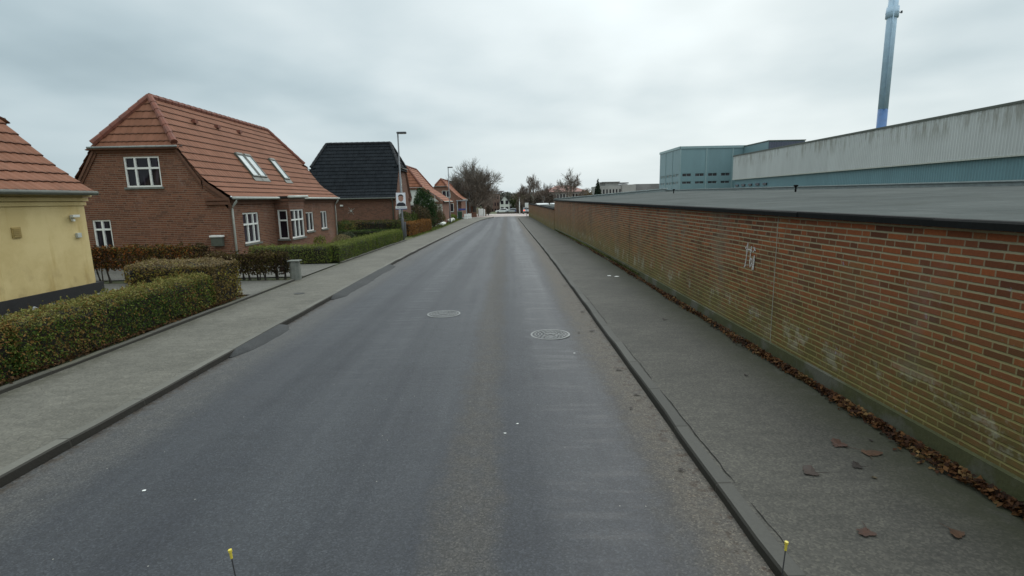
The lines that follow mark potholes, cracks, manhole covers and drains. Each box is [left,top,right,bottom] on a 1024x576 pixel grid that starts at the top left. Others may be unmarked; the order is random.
manhole cover [427,310,460,318]
manhole cover [531,329,570,340]
